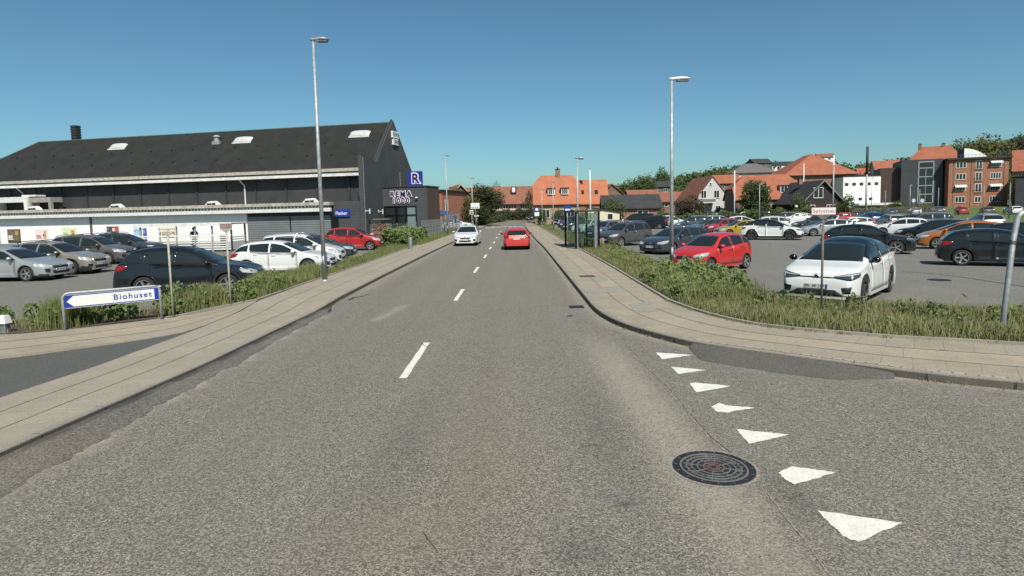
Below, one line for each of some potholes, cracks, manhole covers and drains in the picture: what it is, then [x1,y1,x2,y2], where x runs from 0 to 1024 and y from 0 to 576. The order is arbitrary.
manhole cover [669,450,760,488]
